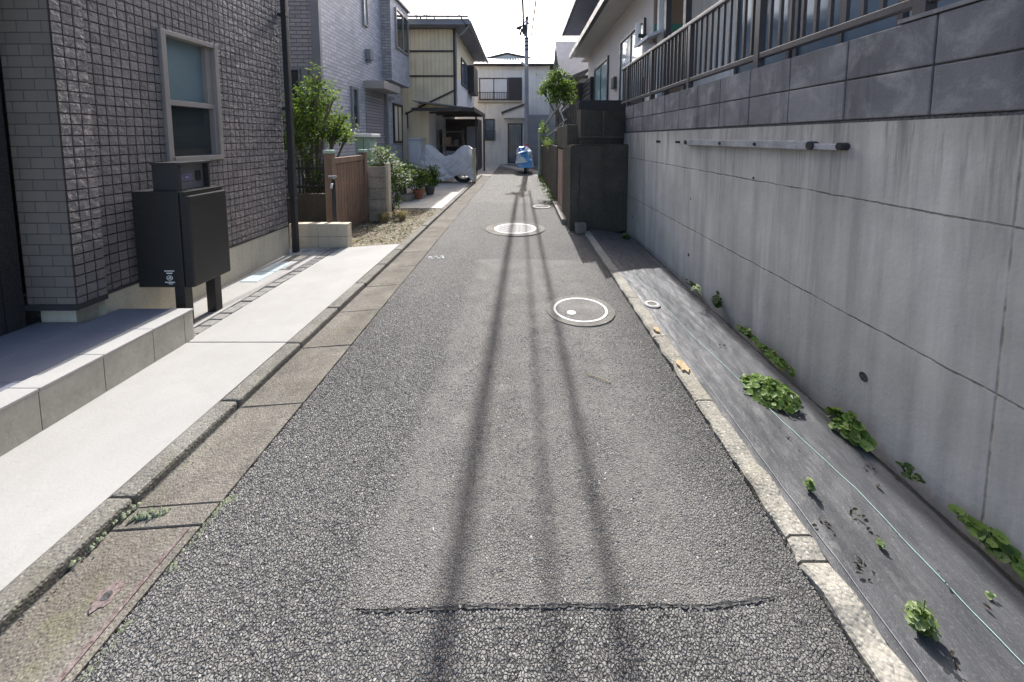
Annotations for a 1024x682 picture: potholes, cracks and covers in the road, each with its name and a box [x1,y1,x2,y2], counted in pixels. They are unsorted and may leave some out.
manhole cover [547,295,615,327]
manhole cover [486,222,545,237]
manhole cover [644,300,660,308]
